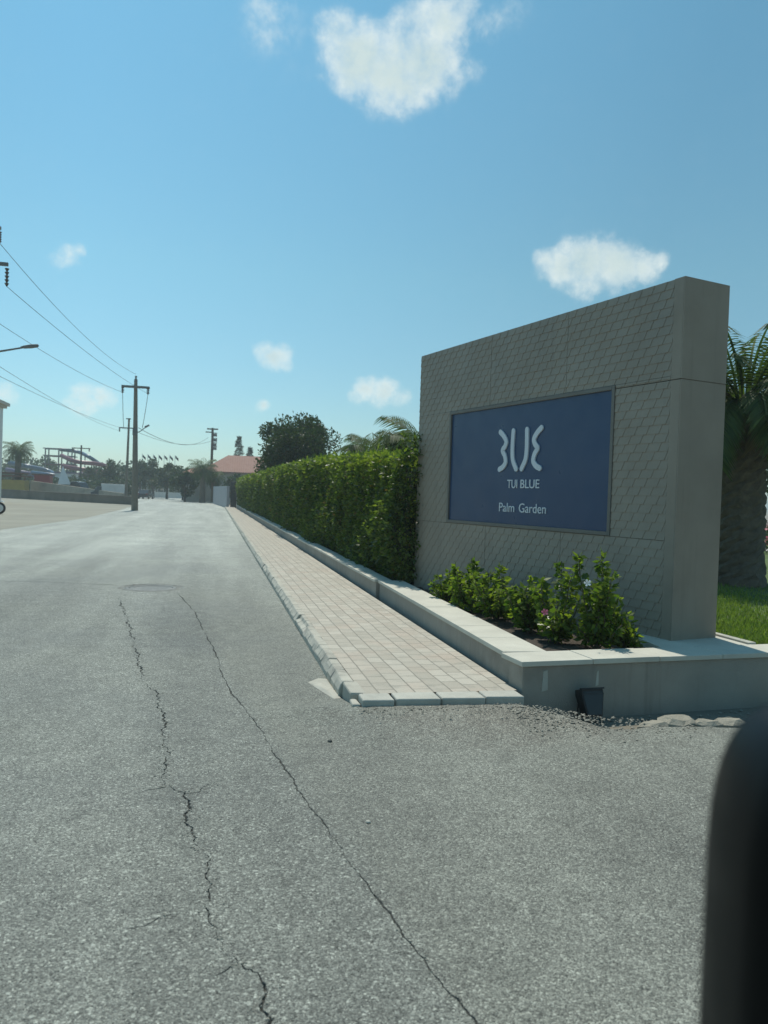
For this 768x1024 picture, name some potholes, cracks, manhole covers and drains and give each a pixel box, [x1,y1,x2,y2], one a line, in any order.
manhole cover [116,584,185,592]
crack [177,593,479,1024]
